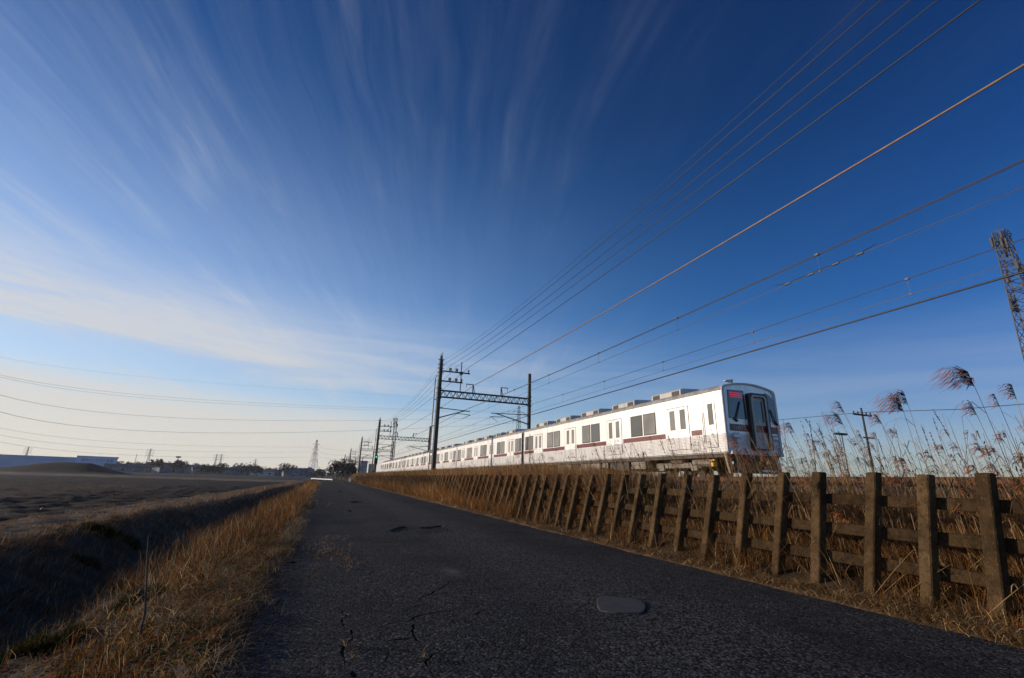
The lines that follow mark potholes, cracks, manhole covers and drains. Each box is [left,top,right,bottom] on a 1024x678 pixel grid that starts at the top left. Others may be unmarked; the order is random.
manhole cover [596,596,647,614]
crack [368,572,485,678]
crack [339,605,354,668]
pothole [391,526,451,535]
